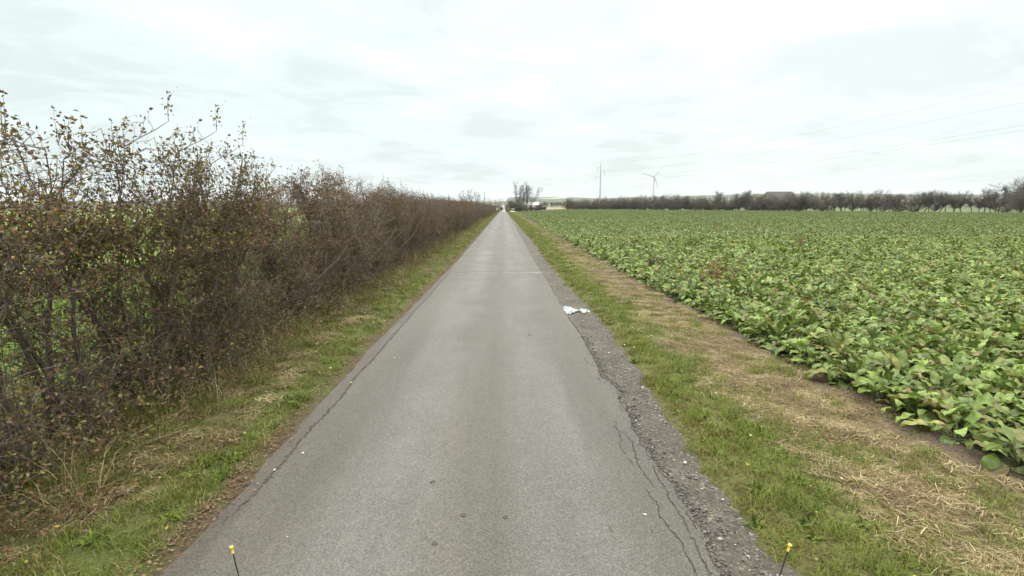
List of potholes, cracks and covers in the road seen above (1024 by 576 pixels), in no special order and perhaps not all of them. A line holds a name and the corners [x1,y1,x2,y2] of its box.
crack [614,399,712,576]
